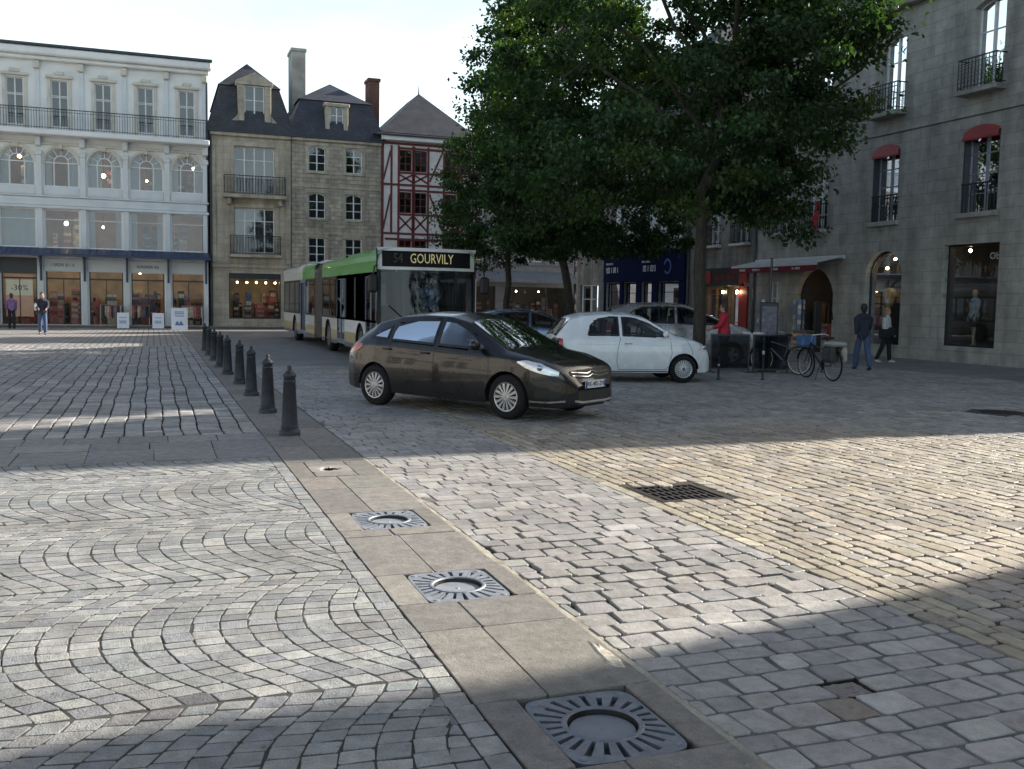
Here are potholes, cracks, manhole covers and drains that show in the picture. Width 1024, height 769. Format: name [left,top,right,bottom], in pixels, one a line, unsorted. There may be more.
drain grate [626,484,731,503]
pothole [816,679,878,700]
